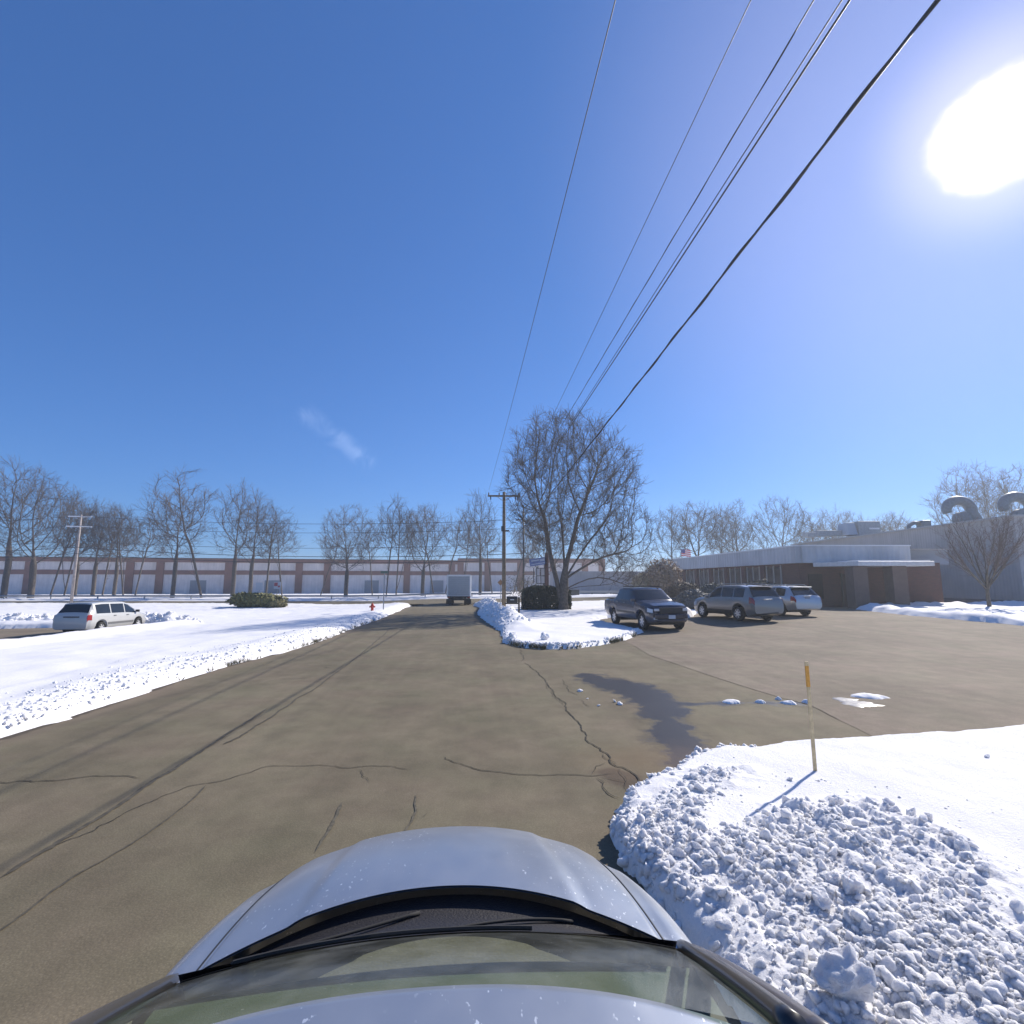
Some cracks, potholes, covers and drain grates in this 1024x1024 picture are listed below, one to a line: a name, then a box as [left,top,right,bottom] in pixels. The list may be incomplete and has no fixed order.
crack [0,765,405,931]
crack [404,796,427,831]
crack [445,649,640,799]
